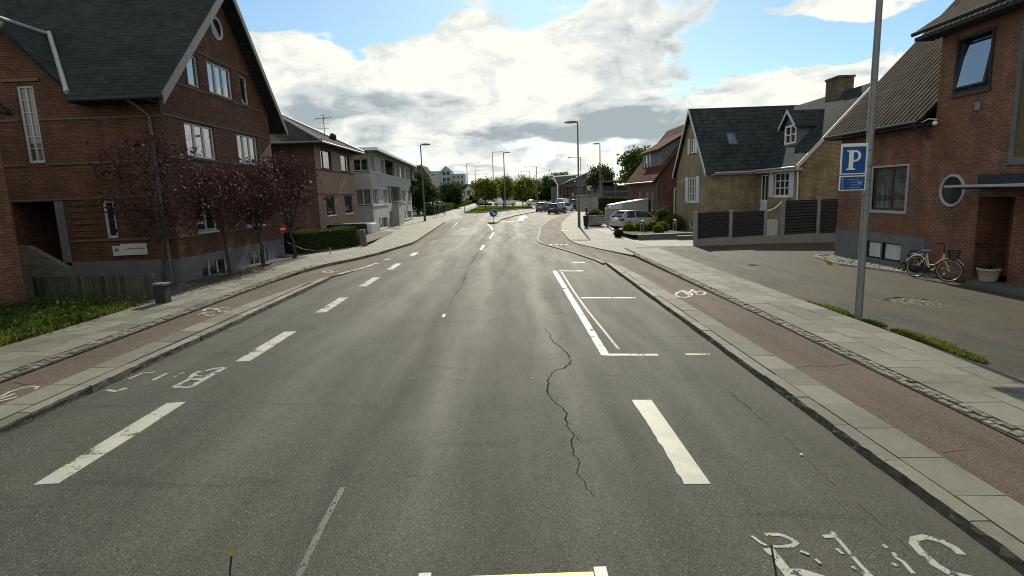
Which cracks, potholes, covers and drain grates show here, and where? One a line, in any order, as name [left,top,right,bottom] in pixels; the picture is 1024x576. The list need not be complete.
crack [545,329,593,495]
crack [727,389,912,553]
